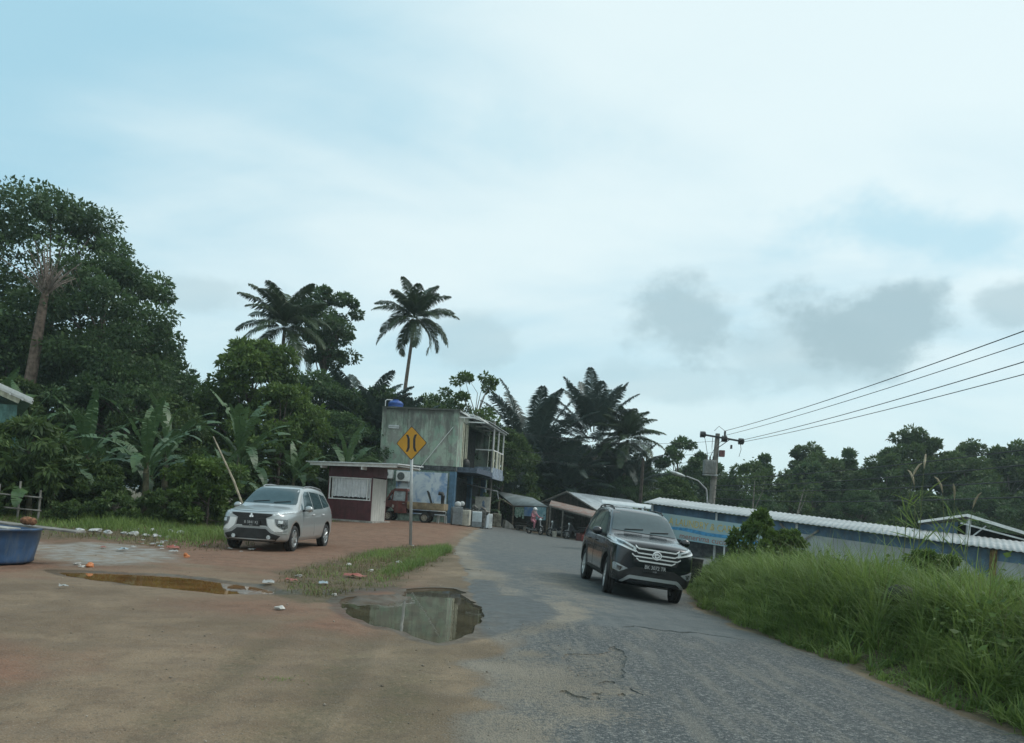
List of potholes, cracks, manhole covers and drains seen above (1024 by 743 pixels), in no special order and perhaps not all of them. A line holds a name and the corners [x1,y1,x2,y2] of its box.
pothole [339,587,484,622]
crack [626,626,743,640]
